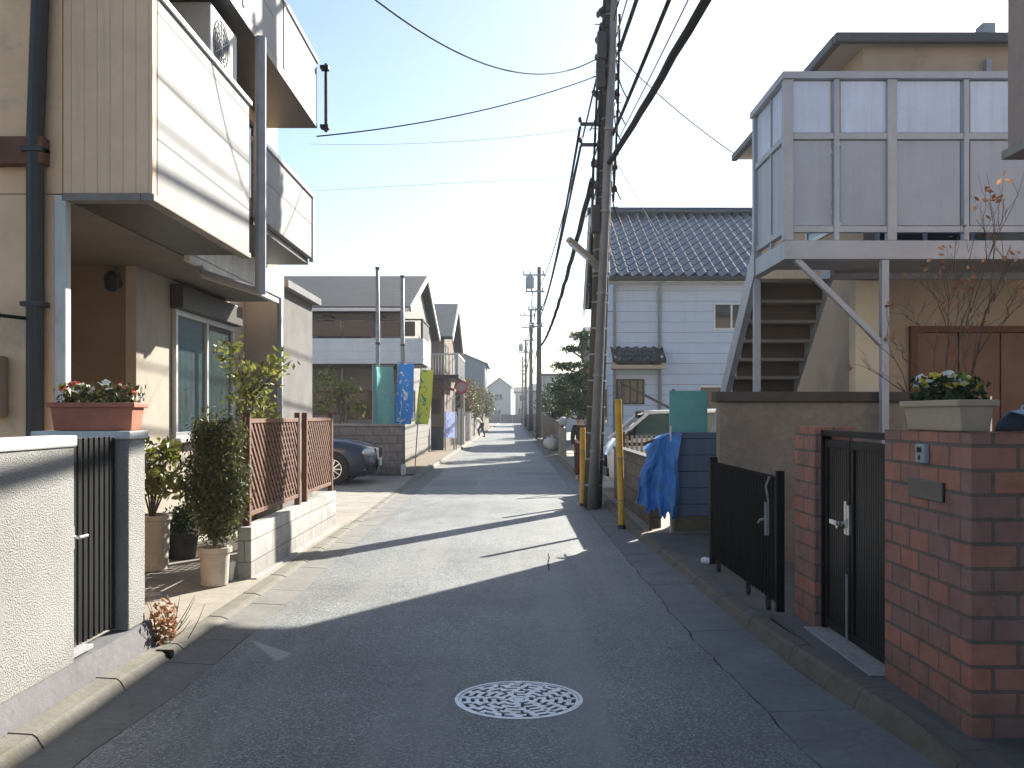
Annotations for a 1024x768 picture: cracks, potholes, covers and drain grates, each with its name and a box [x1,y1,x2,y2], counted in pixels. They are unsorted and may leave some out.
manhole cover [455,681,583,719]
